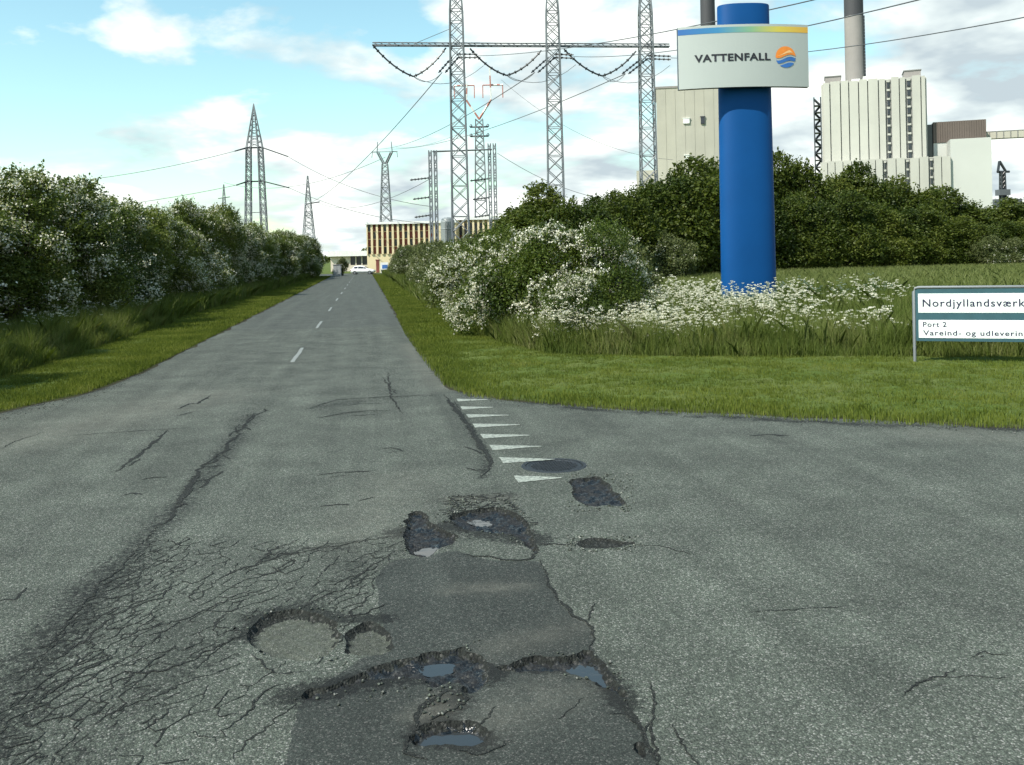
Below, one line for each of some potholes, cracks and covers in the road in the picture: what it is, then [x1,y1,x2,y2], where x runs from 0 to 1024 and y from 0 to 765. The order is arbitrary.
crack [903,650,1009,696]
pothole [402,511,459,557]
pothole [496,650,629,702]
crack [307,373,434,418]
crack [403,690,511,759]
pothole [344,621,395,656]
pothole [449,507,539,553]
pothole [409,720,491,746]
pothole [299,646,491,700]
crack [0,535,405,765]
pothole [246,609,342,661]
pothole [633,742,647,758]
